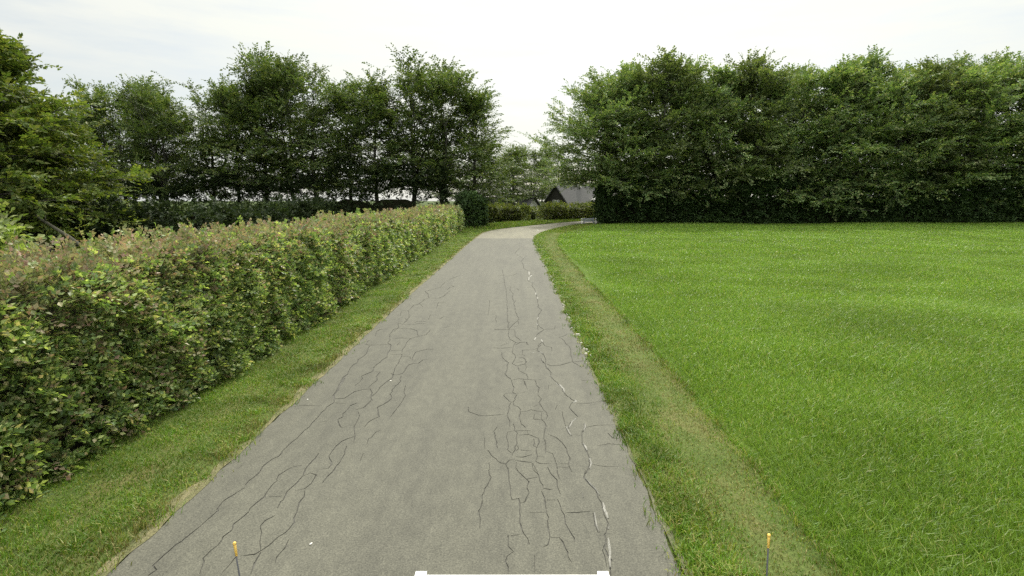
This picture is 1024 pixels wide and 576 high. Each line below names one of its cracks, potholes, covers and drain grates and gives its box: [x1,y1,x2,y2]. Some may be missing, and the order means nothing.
crack [149,311,434,575]
crack [468,229,619,575]
